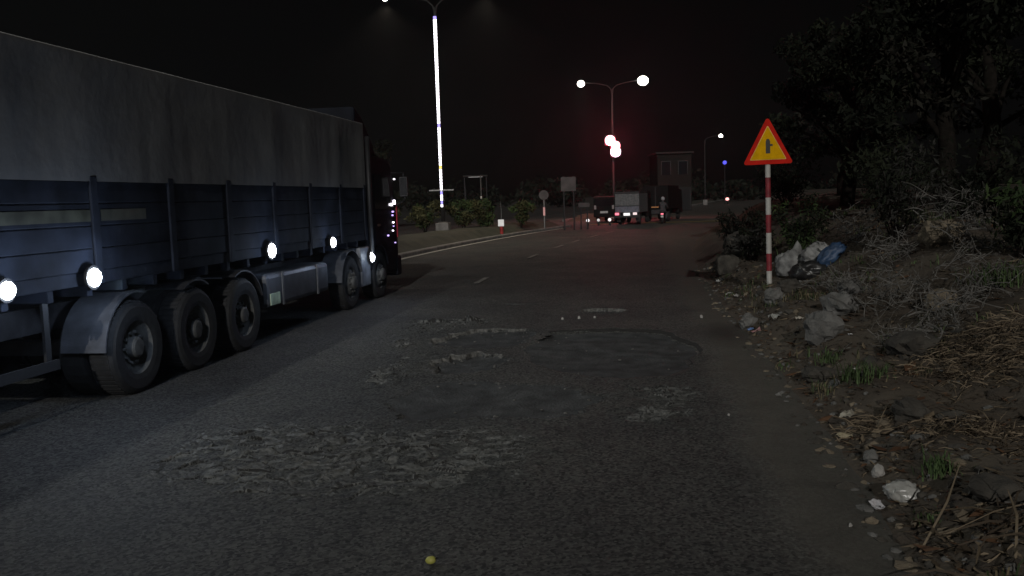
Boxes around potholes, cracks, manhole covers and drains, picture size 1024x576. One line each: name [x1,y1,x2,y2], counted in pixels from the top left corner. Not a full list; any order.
pothole [422,327,552,351]
crack [112,379,723,512]
pothole [417,350,524,378]
